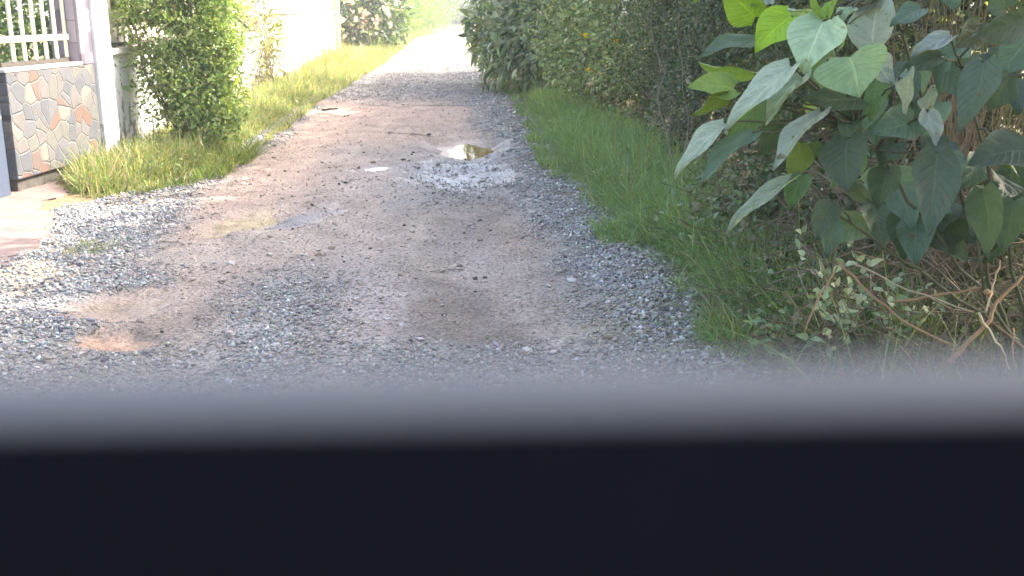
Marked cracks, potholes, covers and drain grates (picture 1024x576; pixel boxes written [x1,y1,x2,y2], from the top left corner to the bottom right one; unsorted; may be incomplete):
pothole [415,136,510,161]
pothole [397,158,521,195]
pothole [74,327,157,352]
pothole [66,288,174,322]
